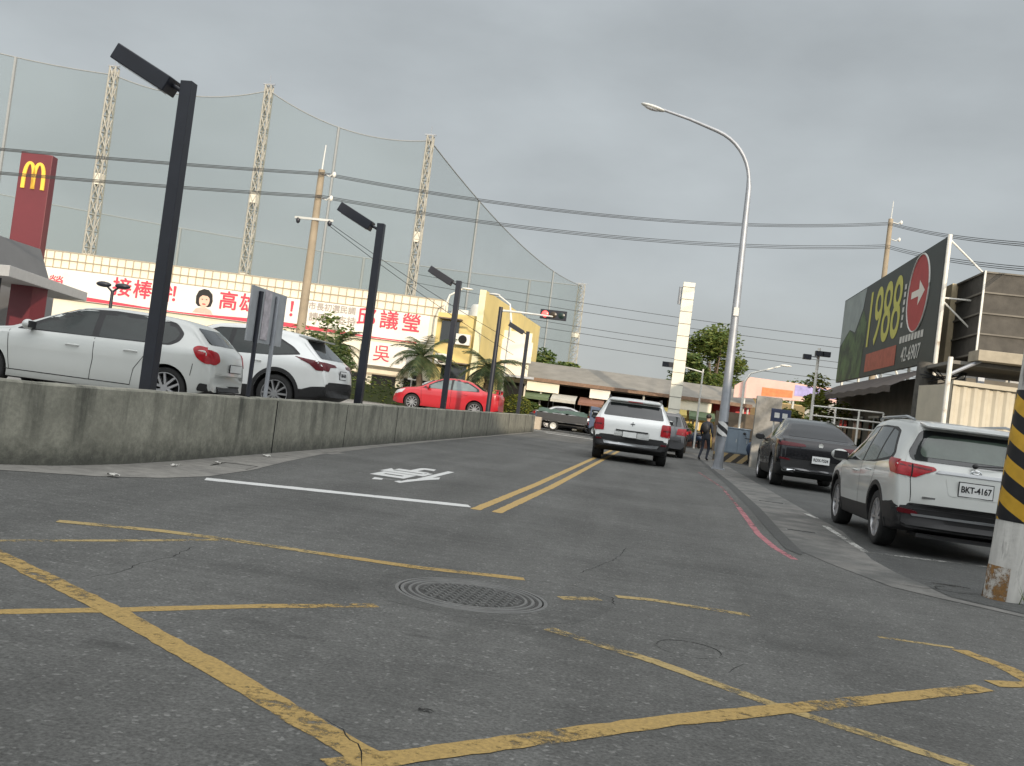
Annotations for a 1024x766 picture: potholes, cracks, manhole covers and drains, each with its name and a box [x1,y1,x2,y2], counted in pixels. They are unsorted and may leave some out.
manhole cover [395,577,548,614]
